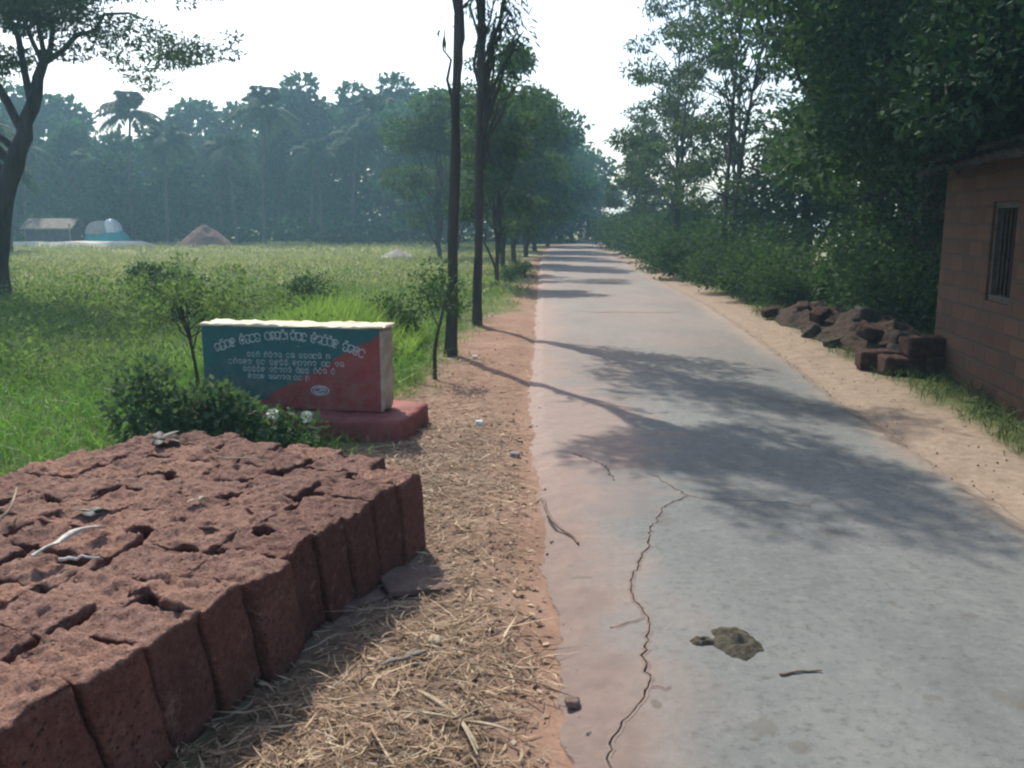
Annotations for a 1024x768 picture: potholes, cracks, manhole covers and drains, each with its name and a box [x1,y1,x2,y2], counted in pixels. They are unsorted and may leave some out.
crack [573,454,810,768]
